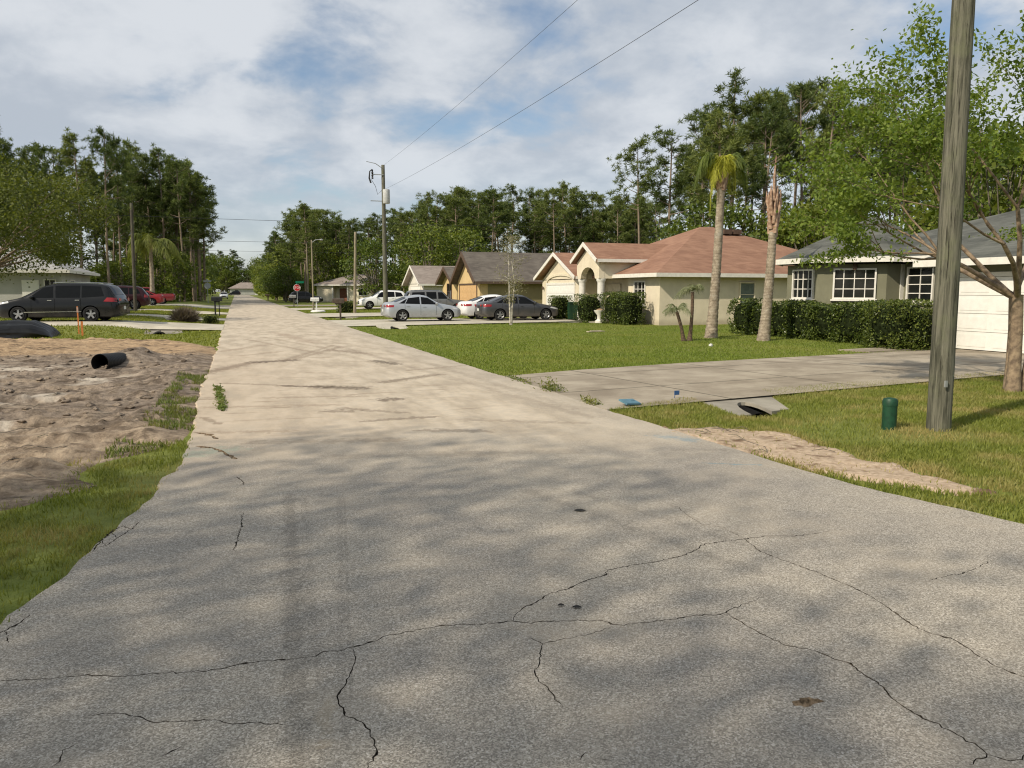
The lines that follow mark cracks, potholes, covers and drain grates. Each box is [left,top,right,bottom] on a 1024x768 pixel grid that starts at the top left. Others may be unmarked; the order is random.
crack [2,503,1024,768]
crack [197,433,237,459]
